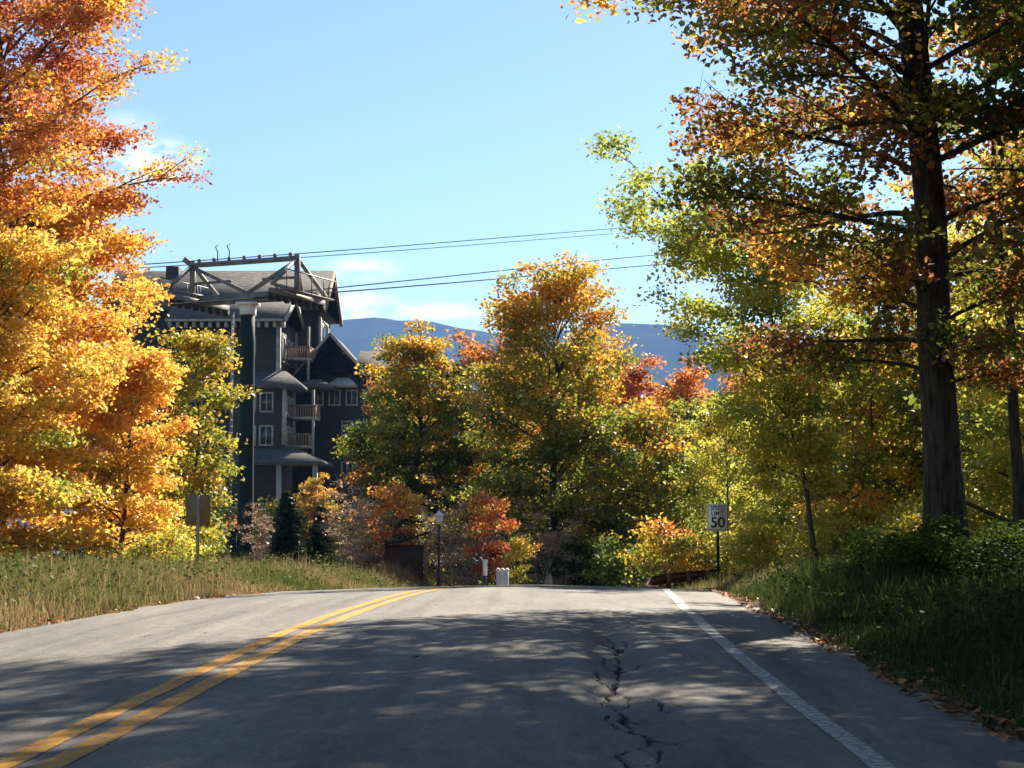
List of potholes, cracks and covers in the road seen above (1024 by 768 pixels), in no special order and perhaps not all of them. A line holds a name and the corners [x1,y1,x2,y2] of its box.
crack [588,636,676,768]
